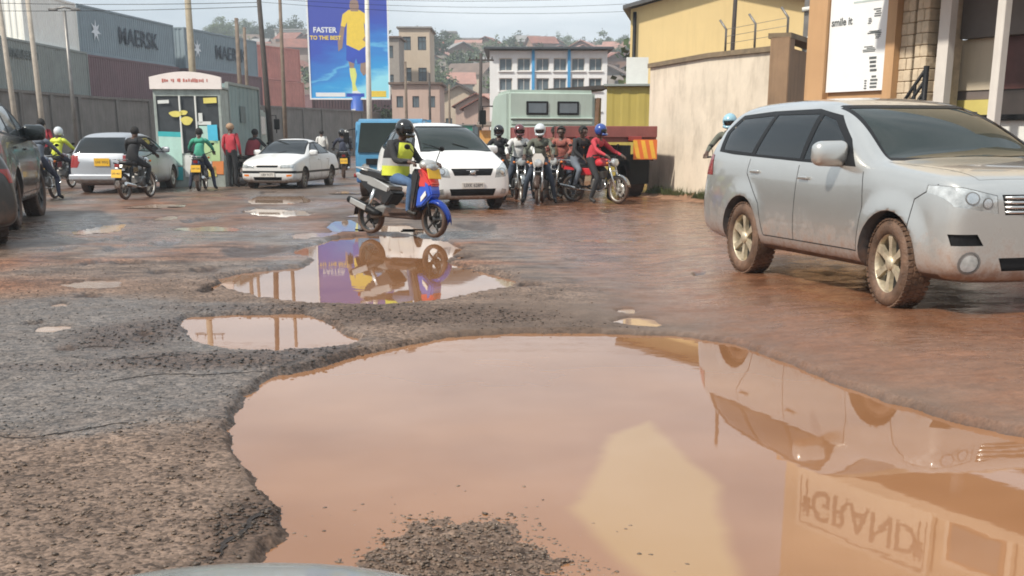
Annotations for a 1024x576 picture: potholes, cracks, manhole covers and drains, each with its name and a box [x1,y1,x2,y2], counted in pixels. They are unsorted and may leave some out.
pothole [212,232,524,304]
pothole [55,277,128,288]
pothole [243,206,316,218]
pothole [172,308,371,351]
pothole [611,313,668,327]
crack [0,422,129,438]
pothole [246,194,317,204]
pothole [69,223,128,235]
pothole [217,326,1024,576]
